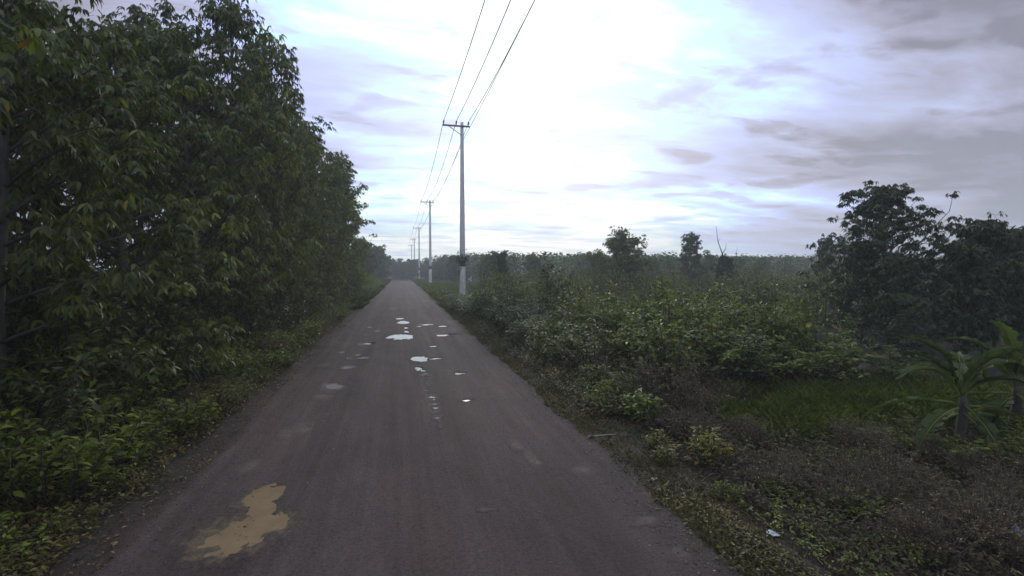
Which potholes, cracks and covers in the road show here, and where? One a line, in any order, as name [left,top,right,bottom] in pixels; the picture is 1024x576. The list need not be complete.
pothole [383,333,421,341]
pothole [406,354,444,364]
